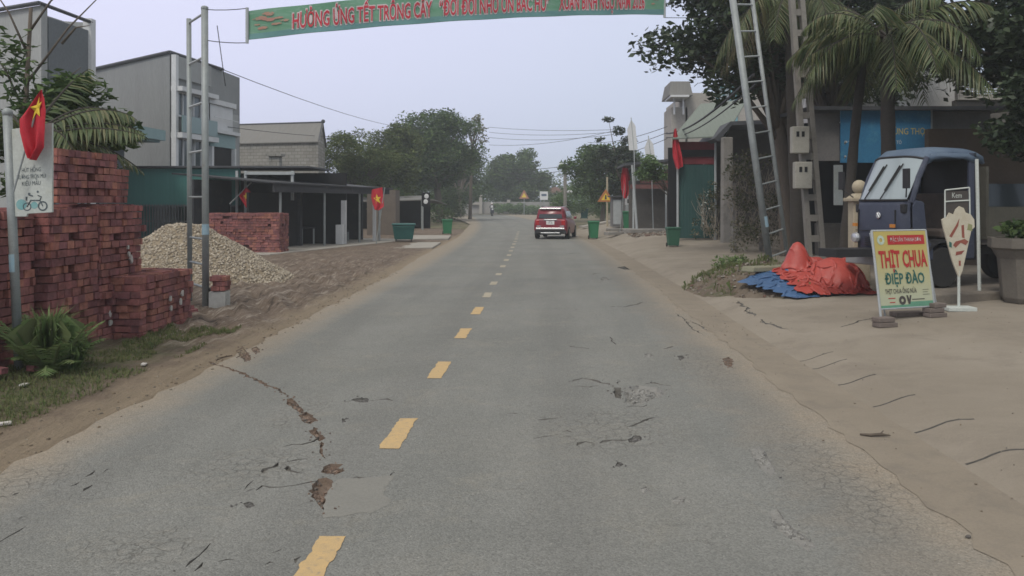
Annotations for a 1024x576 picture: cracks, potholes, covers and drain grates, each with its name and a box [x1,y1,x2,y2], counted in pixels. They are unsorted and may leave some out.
pothole [623,385,670,405]
crack [244,427,336,493]
crack [569,378,621,387]
crack [209,355,295,398]
pothole [308,477,339,514]
crack [537,405,656,446]
